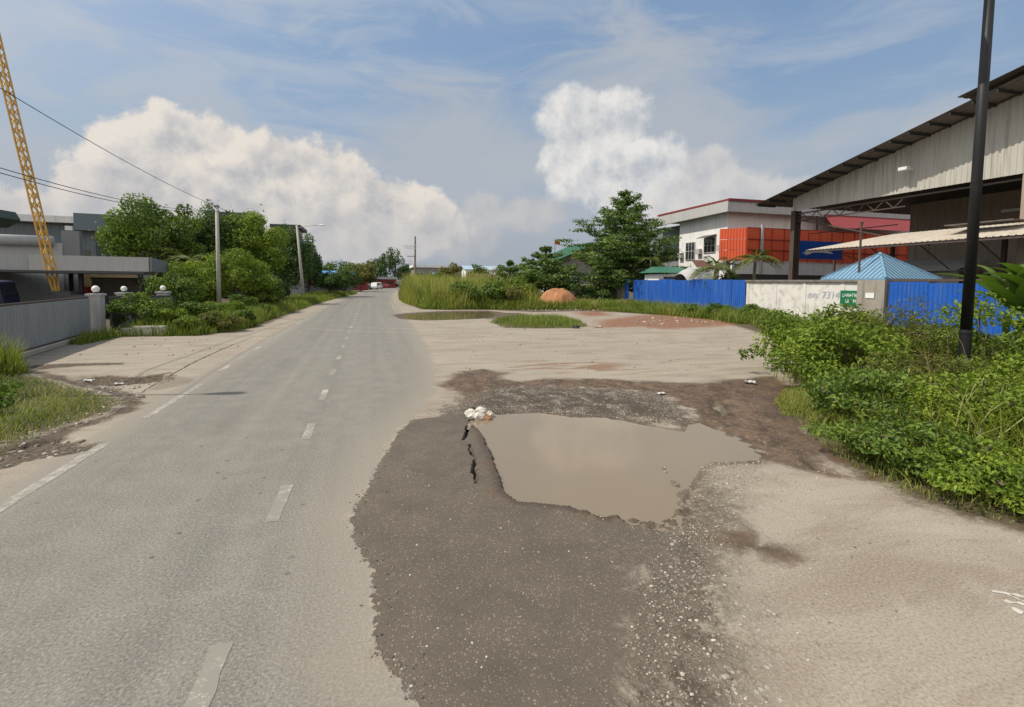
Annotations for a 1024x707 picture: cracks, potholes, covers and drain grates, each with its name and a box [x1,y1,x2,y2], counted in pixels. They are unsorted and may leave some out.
pothole [467,412,772,532]
crack [143,337,253,392]
pothole [401,311,498,320]
crack [461,407,480,484]
